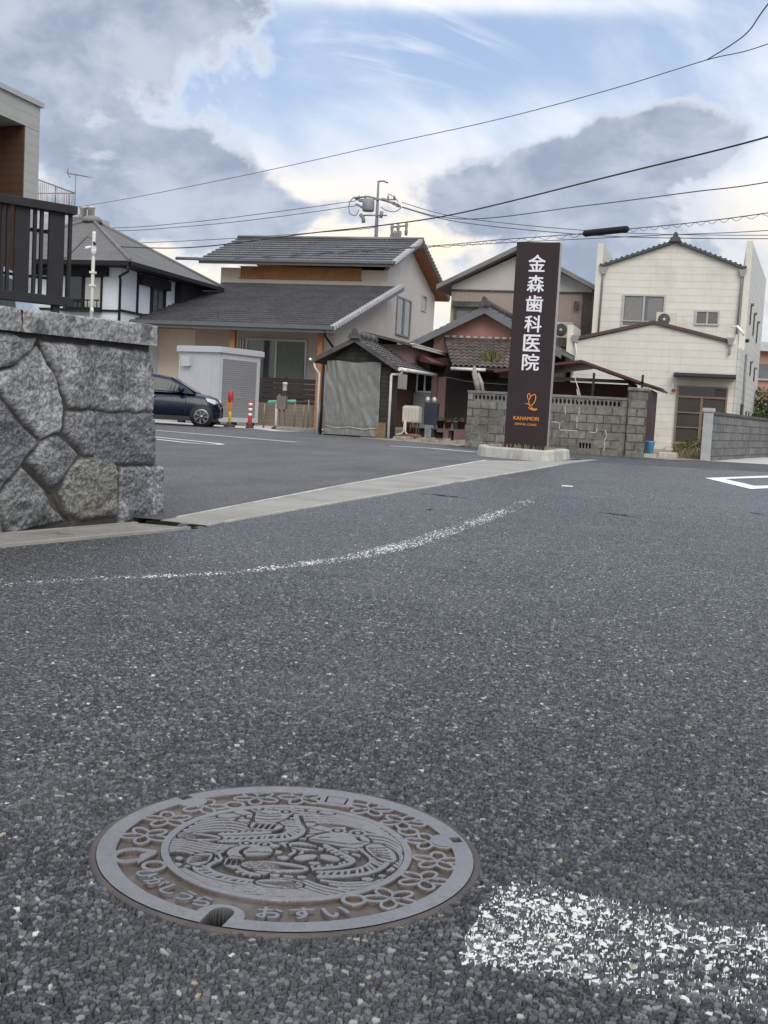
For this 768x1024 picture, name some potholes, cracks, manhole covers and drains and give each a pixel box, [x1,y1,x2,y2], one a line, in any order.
manhole cover [88,786,481,940]
